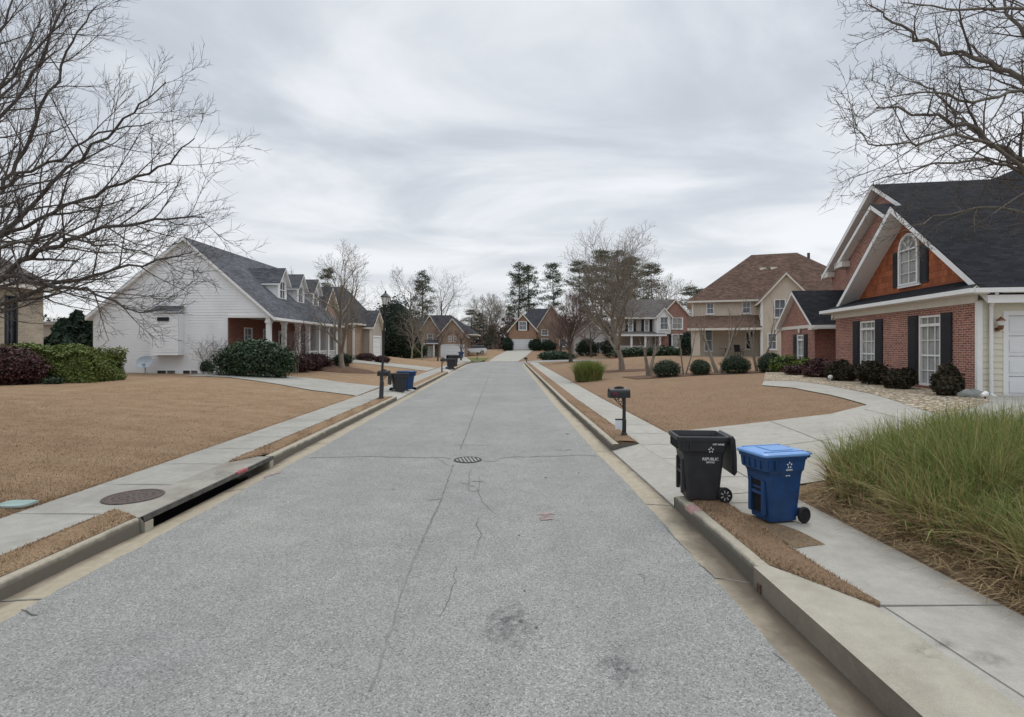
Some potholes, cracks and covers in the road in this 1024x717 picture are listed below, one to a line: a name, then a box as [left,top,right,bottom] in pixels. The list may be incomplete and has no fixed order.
drain grate [97,456,274,533]
crack [439,449,592,618]
manhole cover [100,489,165,505]
